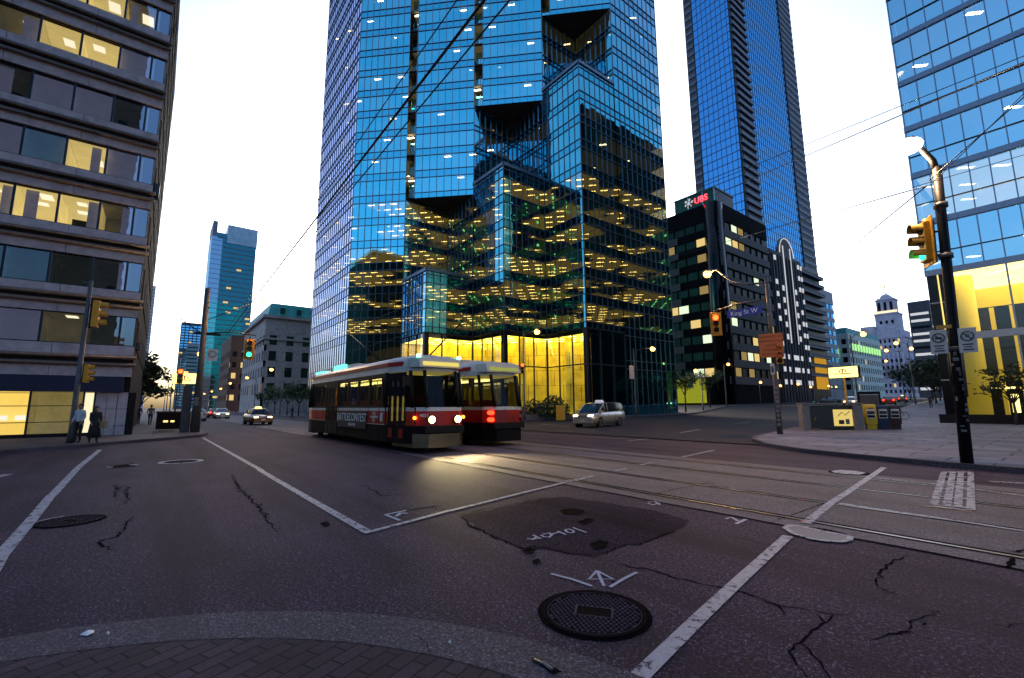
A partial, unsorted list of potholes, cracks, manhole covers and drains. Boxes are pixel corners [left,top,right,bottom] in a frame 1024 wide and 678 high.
manhole cover [31,514,107,529]
manhole cover [538,590,653,641]
crack [867,554,941,639]
crack [231,474,283,532]
crack [97,484,133,550]
crack [598,532,852,678]
pothole [590,540,609,549]
